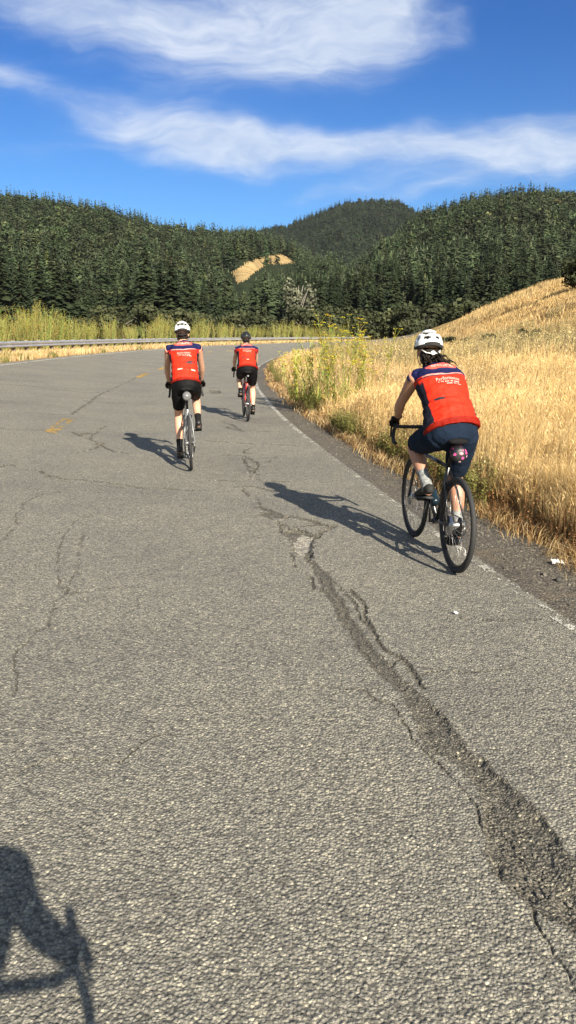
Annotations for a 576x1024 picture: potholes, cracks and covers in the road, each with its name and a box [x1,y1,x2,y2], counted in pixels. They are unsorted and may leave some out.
crack [0,421,513,830]
crack [528,907,542,933]
crack [5,384,146,405]
